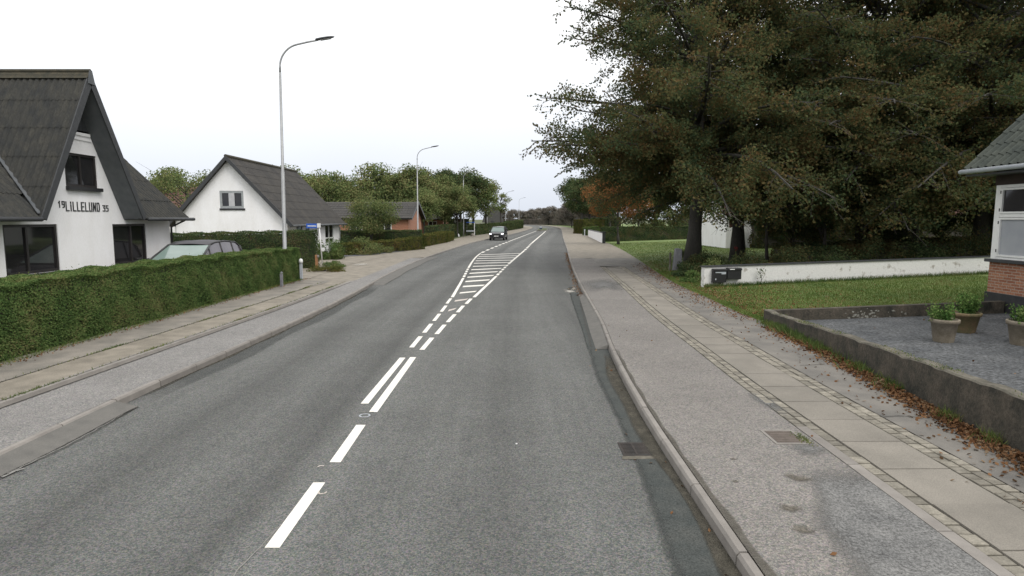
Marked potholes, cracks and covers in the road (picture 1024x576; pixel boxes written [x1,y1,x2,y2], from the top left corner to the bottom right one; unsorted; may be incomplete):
drain grate [617,442,655,459]
manhole cover [760,430,818,446]
